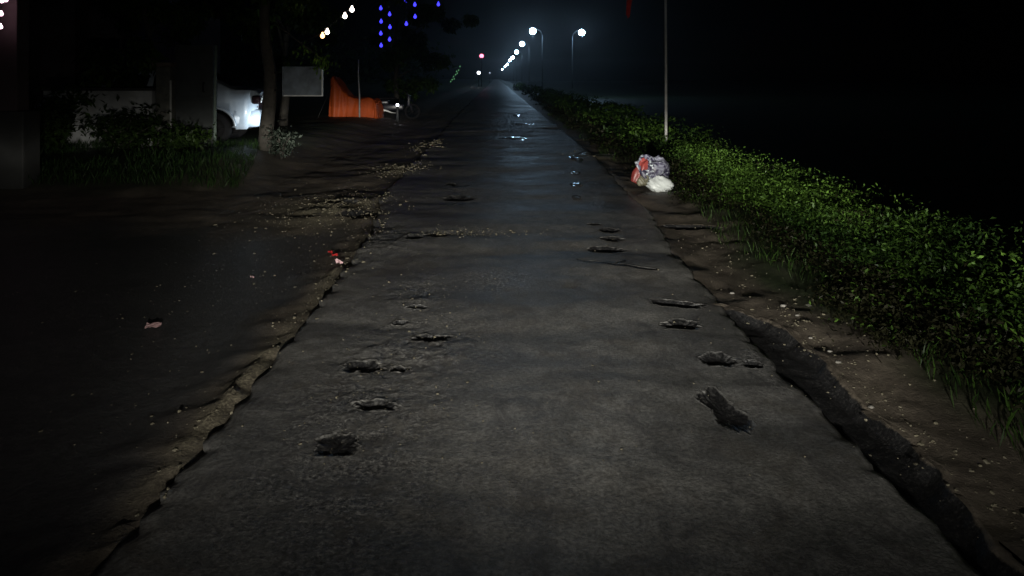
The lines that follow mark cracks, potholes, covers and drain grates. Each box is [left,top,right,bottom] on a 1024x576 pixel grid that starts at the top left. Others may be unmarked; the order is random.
pothole [658,317,704,331]
pothole [388,364,413,373]
pothole [350,398,402,412]
pothole [311,432,362,460]
pothole [695,351,744,368]
pothole [408,333,456,343]
pothole [584,246,631,254]
crack [575,259,656,271]
pothole [645,298,709,309]
pothole [336,359,389,375]
pothole [692,384,758,437]
